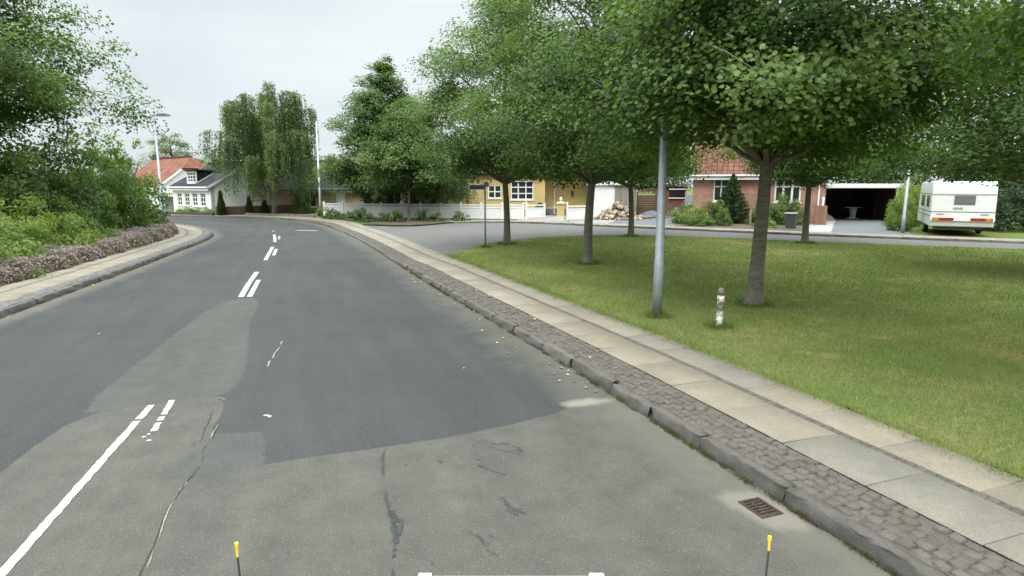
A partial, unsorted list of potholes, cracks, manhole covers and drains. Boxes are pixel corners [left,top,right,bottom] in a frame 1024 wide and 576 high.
crack [381,449,404,576]
crack [139,397,225,576]
drain grate [738,497,784,519]
